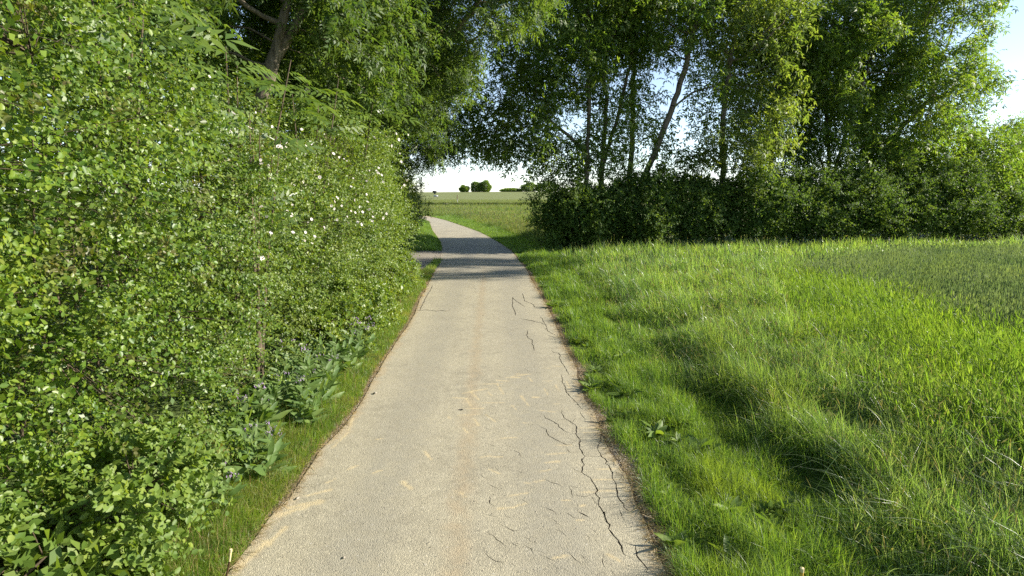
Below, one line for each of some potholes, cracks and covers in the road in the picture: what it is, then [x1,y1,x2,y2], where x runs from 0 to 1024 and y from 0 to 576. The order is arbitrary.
crack [480,293,655,575]
